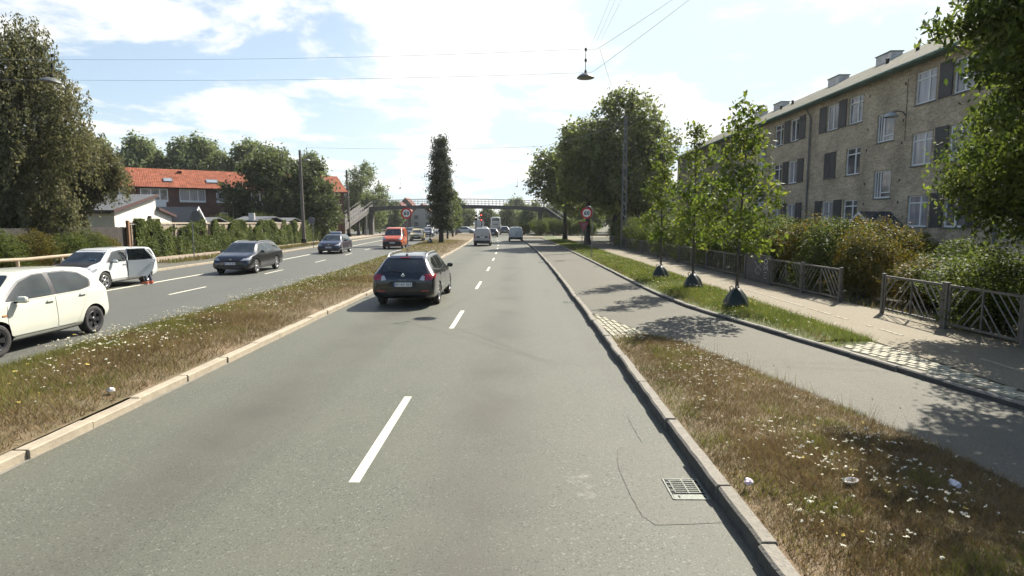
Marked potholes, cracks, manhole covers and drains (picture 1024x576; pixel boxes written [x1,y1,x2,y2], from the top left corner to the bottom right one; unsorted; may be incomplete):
drain grate [662,478,711,500]
